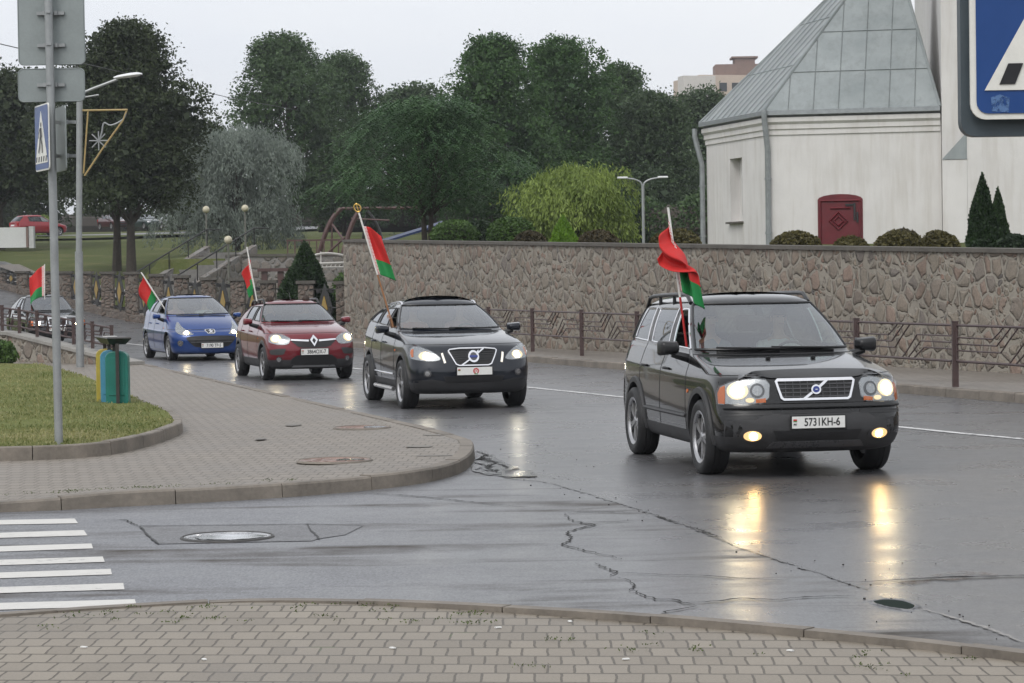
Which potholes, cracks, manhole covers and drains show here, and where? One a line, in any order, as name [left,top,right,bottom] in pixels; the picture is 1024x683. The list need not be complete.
crack [561,511,840,614]
manhole cover [180,531,275,543]
